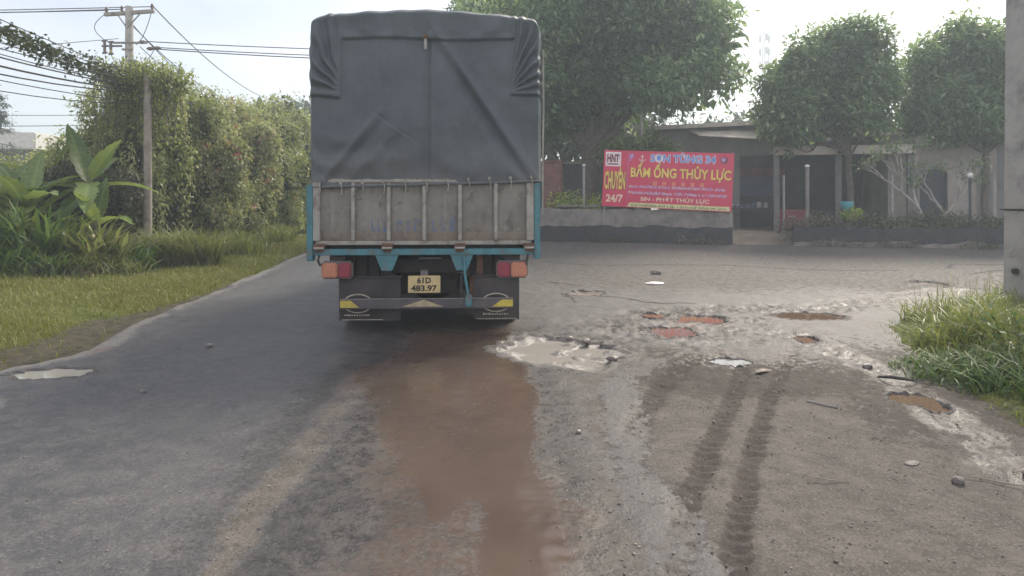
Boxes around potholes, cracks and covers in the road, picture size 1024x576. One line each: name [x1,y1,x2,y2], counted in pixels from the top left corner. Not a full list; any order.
pothole [482,332,641,374]
pothole [881,390,956,415]
pothole [792,335,821,344]
pothole [704,357,757,368]
crack [546,281,679,304]
pothole [644,325,702,338]
pothole [671,313,733,324]
pothole [762,310,853,321]
pothole [0,366,107,380]
pothole [640,311,667,319]
